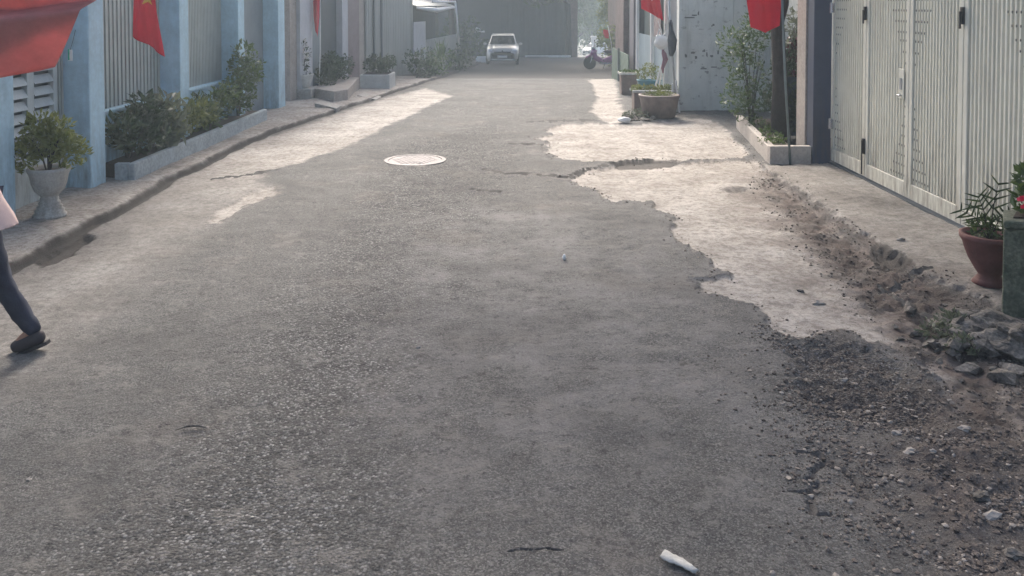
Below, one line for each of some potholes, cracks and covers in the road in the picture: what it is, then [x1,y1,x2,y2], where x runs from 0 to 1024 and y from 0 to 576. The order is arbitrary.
crack [210,168,281,180]
pothole [867,242,914,273]
pothole [768,330,967,434]
manhole cover [384,154,446,166]
